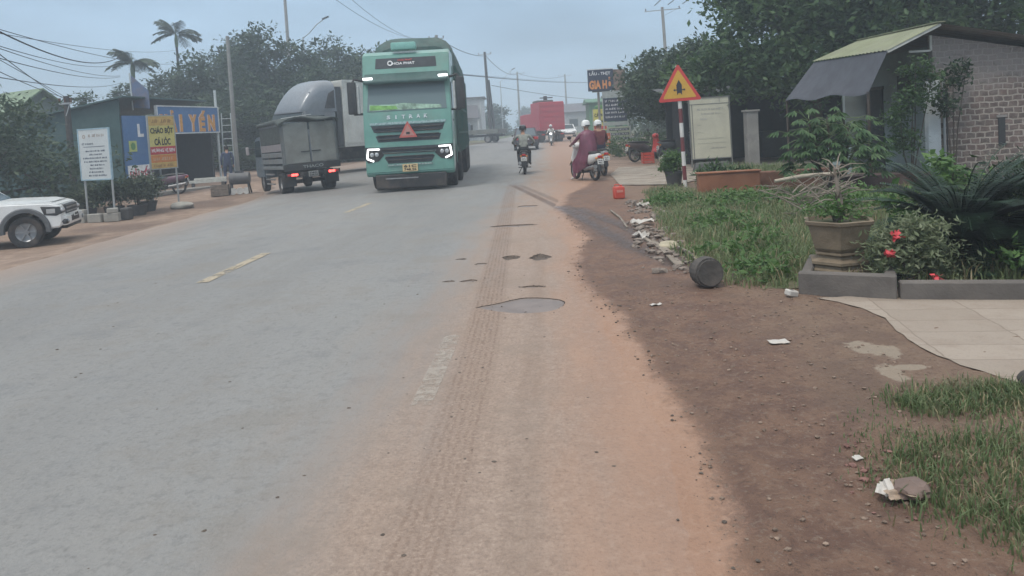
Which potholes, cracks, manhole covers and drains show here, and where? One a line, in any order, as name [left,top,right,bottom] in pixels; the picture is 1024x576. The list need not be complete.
pothole [476,297,565,313]
